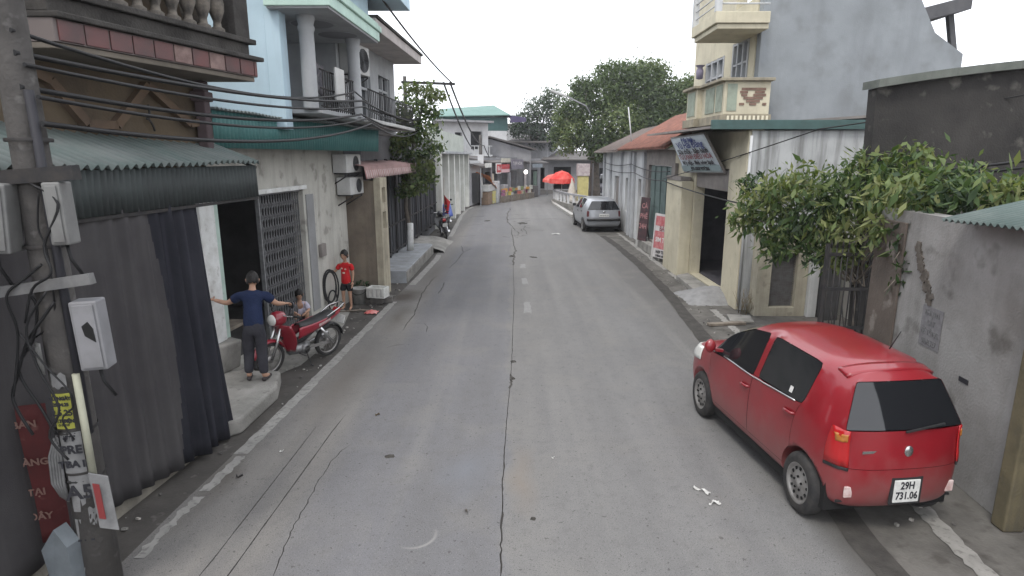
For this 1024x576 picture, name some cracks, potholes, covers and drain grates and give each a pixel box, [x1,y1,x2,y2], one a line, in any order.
crack [390,280,444,347]
crack [498,208,527,576]
crack [199,418,343,576]
